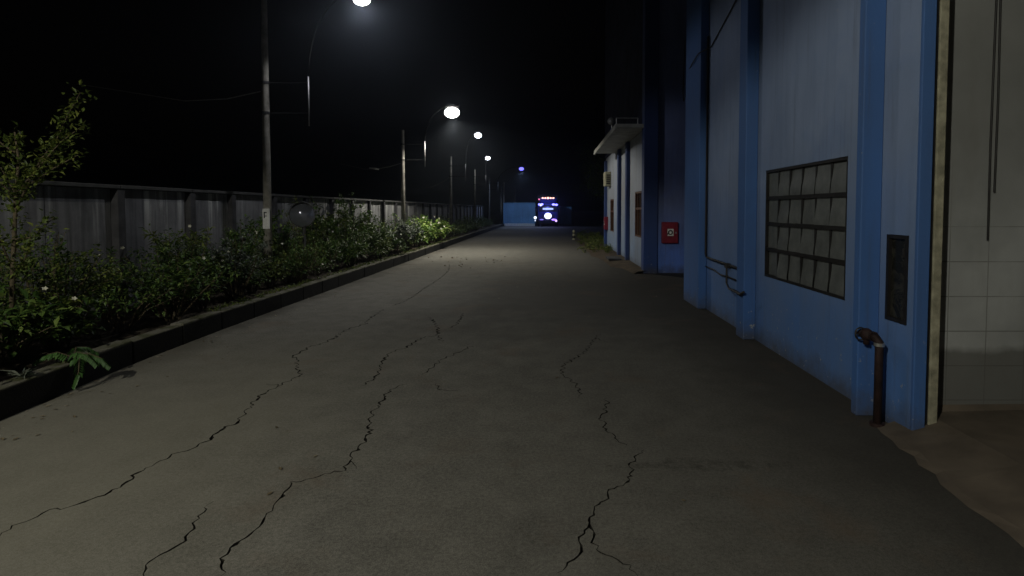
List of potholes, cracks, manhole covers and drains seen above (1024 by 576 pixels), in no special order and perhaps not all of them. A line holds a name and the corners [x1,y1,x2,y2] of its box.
crack [0,310,382,536]
crack [143,314,470,576]
crack [557,400,643,576]
crack [560,335,601,395]
